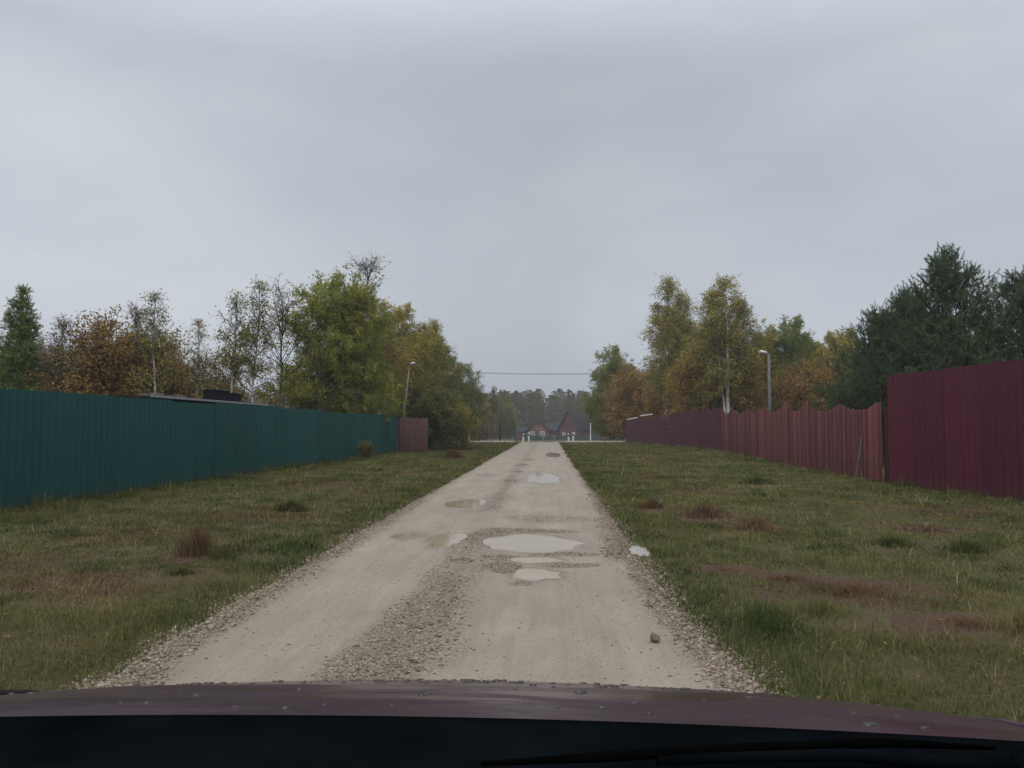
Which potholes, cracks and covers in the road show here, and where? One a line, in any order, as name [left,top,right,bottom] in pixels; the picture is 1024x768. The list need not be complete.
pothole [506,556,569,564]
pothole [477,532,589,554]
pothole [425,532,469,549]
pothole [524,472,563,484]
pothole [628,545,651,557]
pothole [443,499,489,509]
pothole [509,567,565,582]
